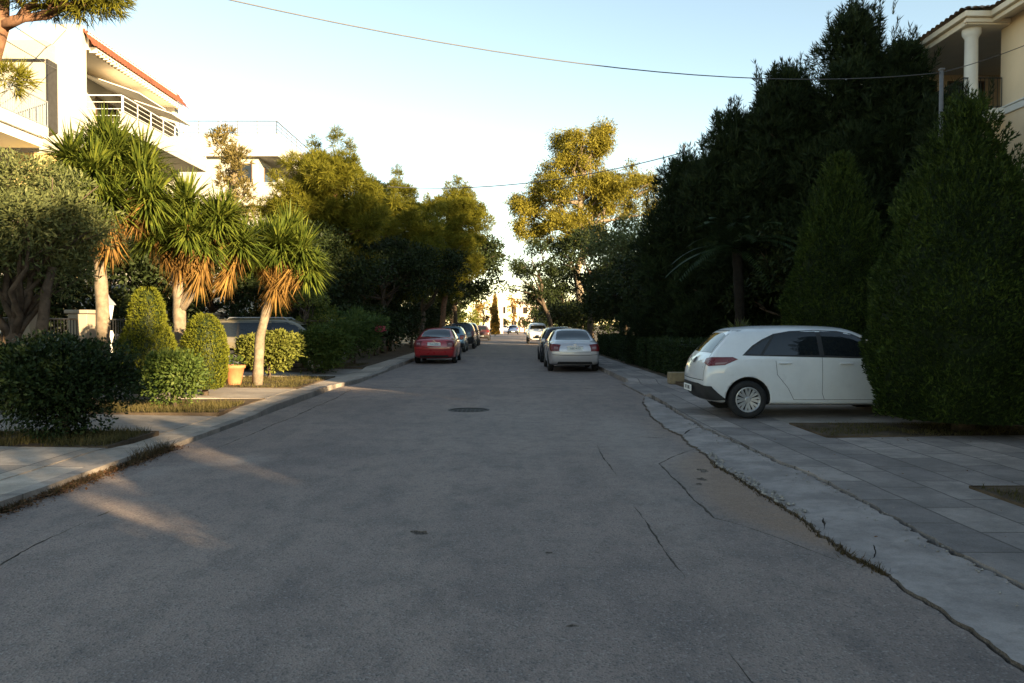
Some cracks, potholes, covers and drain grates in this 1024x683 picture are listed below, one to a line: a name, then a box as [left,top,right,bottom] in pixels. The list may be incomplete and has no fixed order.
crack [0,525,78,566]
crack [633,451,854,577]
